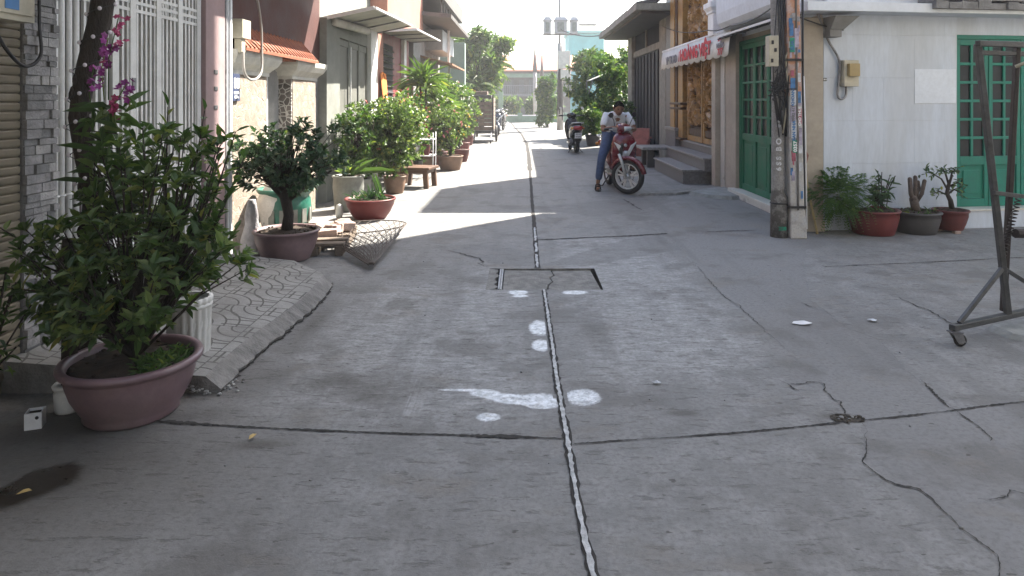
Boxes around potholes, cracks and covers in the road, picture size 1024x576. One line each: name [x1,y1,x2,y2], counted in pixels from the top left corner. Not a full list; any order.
manhole cover [486,268,603,290]
crack [780,380,1001,576]
